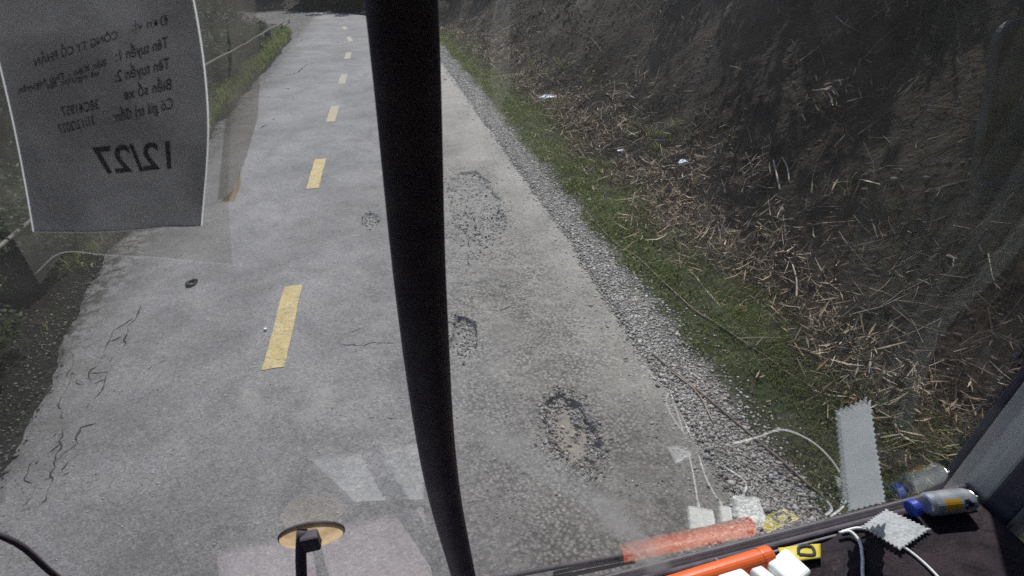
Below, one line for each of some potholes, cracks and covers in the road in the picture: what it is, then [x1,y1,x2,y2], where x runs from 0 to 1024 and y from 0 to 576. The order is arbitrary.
pothole [443,169,517,259]
pothole [448,310,482,365]
pothole [359,211,381,231]
pothole [532,383,614,492]
crack [24,306,141,510]
